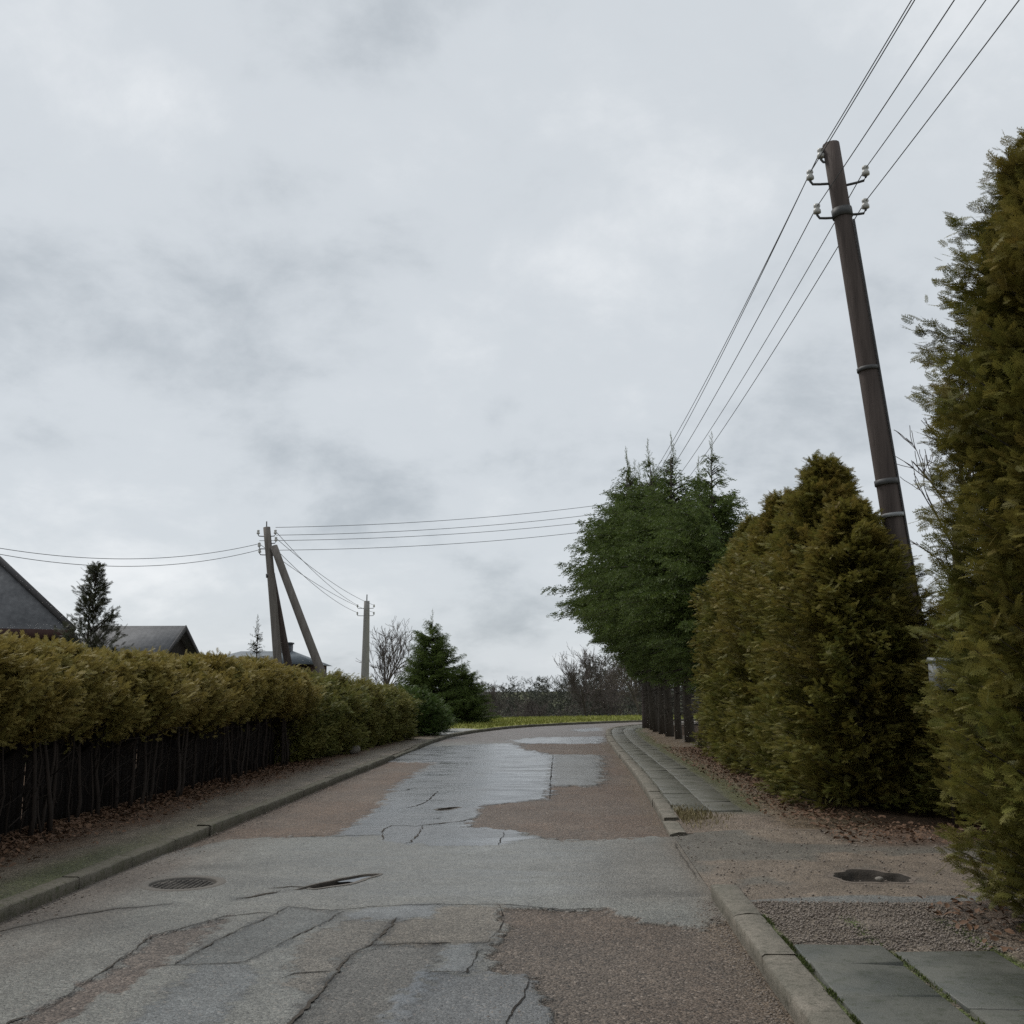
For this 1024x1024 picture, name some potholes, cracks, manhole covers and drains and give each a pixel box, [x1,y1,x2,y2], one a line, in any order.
pothole [294,873,383,890]
crack [381,789,471,843]
crack [6,886,590,1024]
pothole [828,868,917,883]
